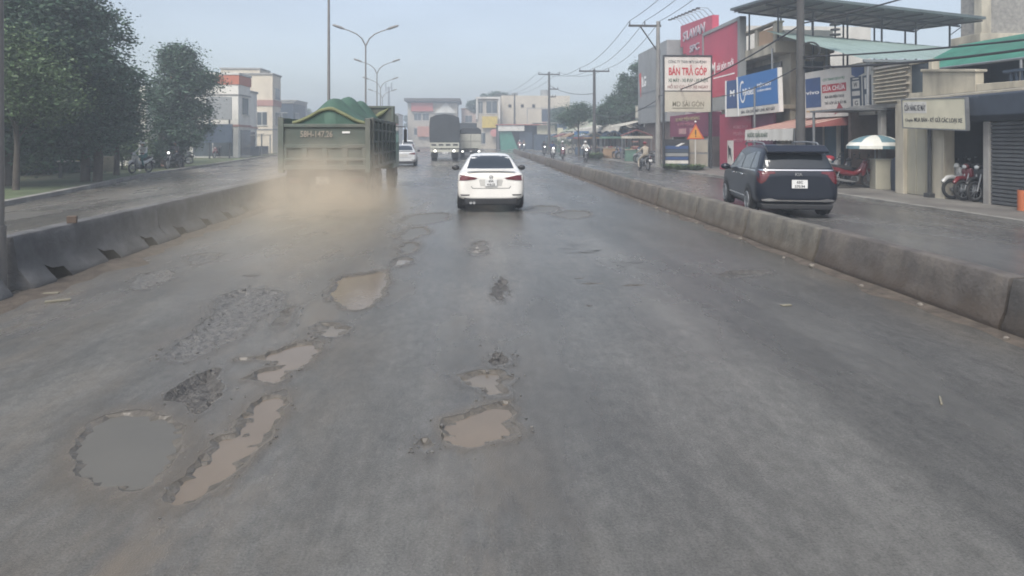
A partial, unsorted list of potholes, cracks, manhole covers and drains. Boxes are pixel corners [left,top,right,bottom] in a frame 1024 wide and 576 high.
pothole [467,239,491,256]
pothole [159,362,246,422]
pothole [58,404,197,503]
pothole [307,318,355,339]
pothole [455,361,525,404]
pothole [479,344,519,373]
pothole [429,396,534,459]
pothole [398,226,430,240]
pothole [155,387,297,520]
pothole [488,275,512,301]
pothole [231,338,331,384]
pothole [321,269,397,311]
